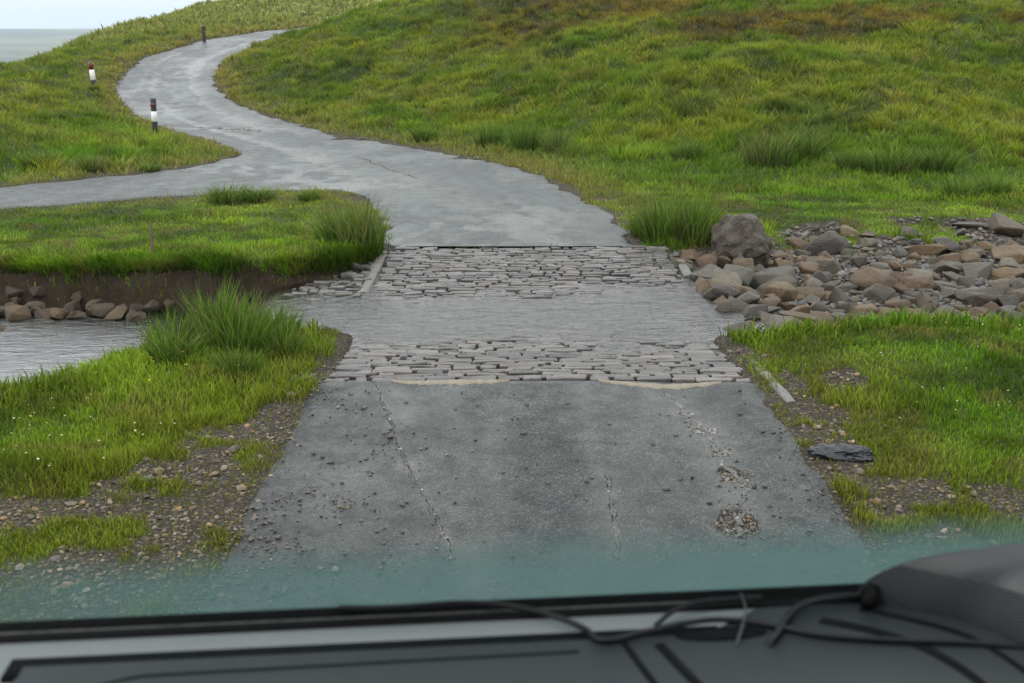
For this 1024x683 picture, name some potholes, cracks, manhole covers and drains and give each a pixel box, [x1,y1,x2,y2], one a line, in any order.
pothole [709,508,764,541]
pothole [715,465,751,483]
crack [363,159,417,179]
crack [664,391,752,536]
crack [373,382,455,556]
crack [605,474,621,549]
